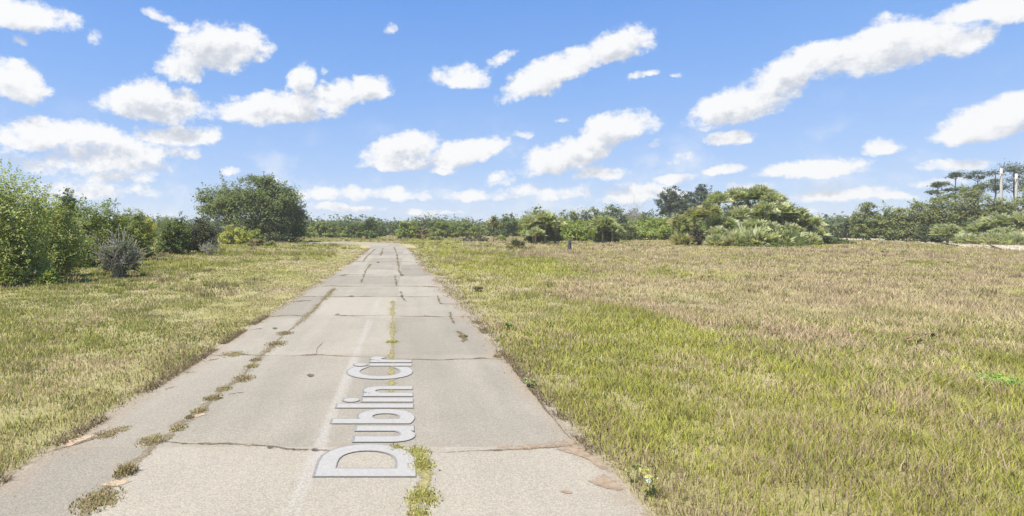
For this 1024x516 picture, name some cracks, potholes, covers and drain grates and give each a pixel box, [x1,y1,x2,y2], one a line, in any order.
crack [79,248,584,516]
